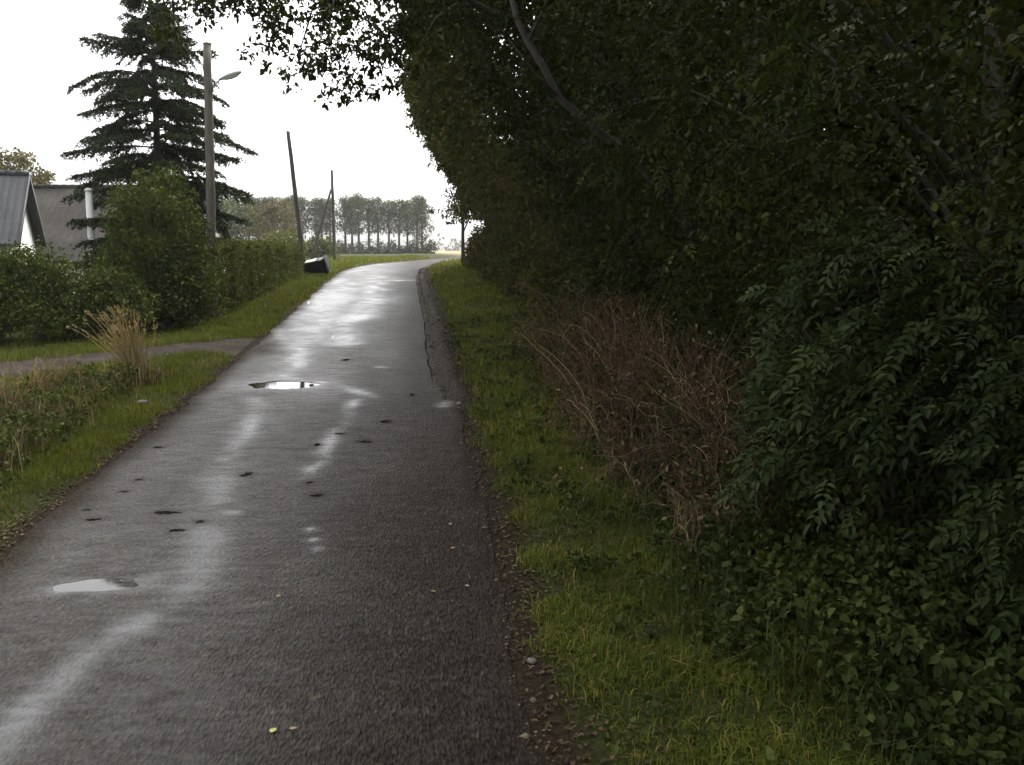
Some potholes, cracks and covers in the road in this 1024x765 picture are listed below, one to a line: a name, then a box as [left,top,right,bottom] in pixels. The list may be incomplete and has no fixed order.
pothole [248,381,321,389]
pothole [51,578,139,592]
